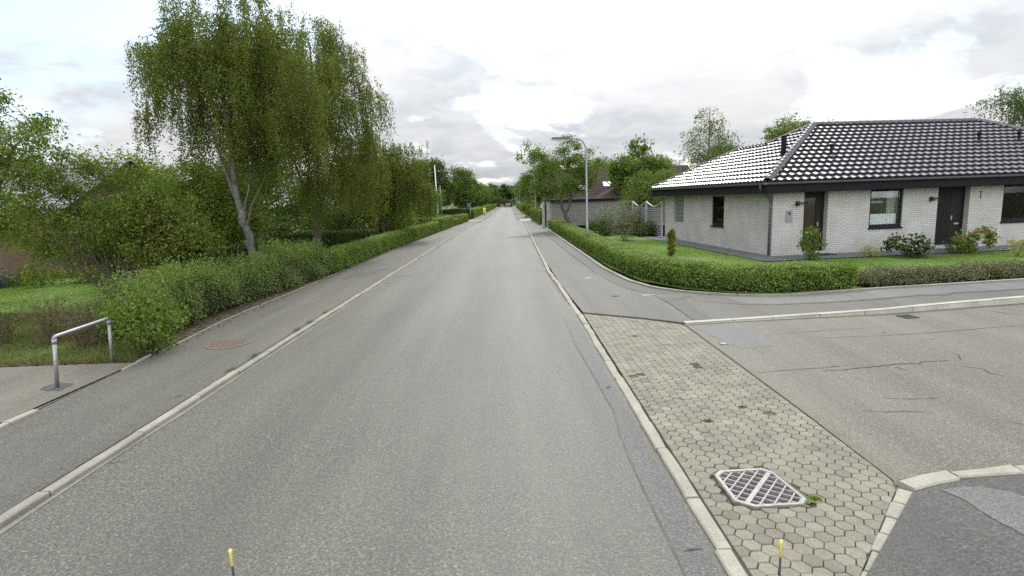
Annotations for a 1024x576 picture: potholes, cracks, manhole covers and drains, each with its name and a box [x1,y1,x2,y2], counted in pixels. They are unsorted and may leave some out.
manhole cover [205,338,250,349]
drain grate [714,468,807,511]
crack [758,354,1003,376]
